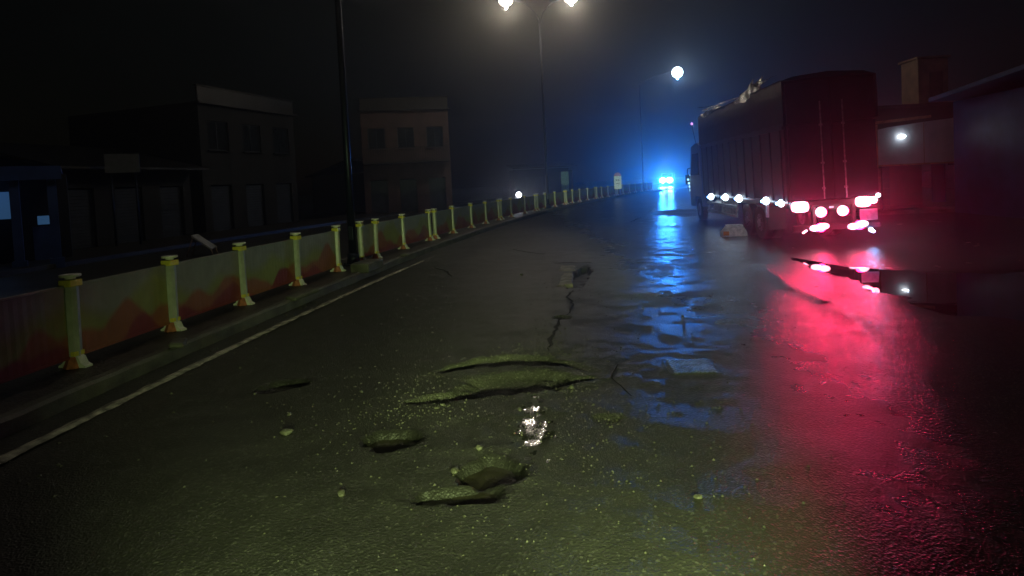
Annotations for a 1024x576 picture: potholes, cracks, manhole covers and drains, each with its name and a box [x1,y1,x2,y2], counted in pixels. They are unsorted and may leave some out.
pothole [447,451,538,485]
pothole [407,354,602,383]
crack [547,291,574,351]
pothole [395,391,466,406]
pothole [395,484,515,506]
pothole [357,426,428,455]
pothole [564,264,595,290]
pothole [444,366,611,401]
pothole [253,377,319,395]
crack [611,365,632,396]
